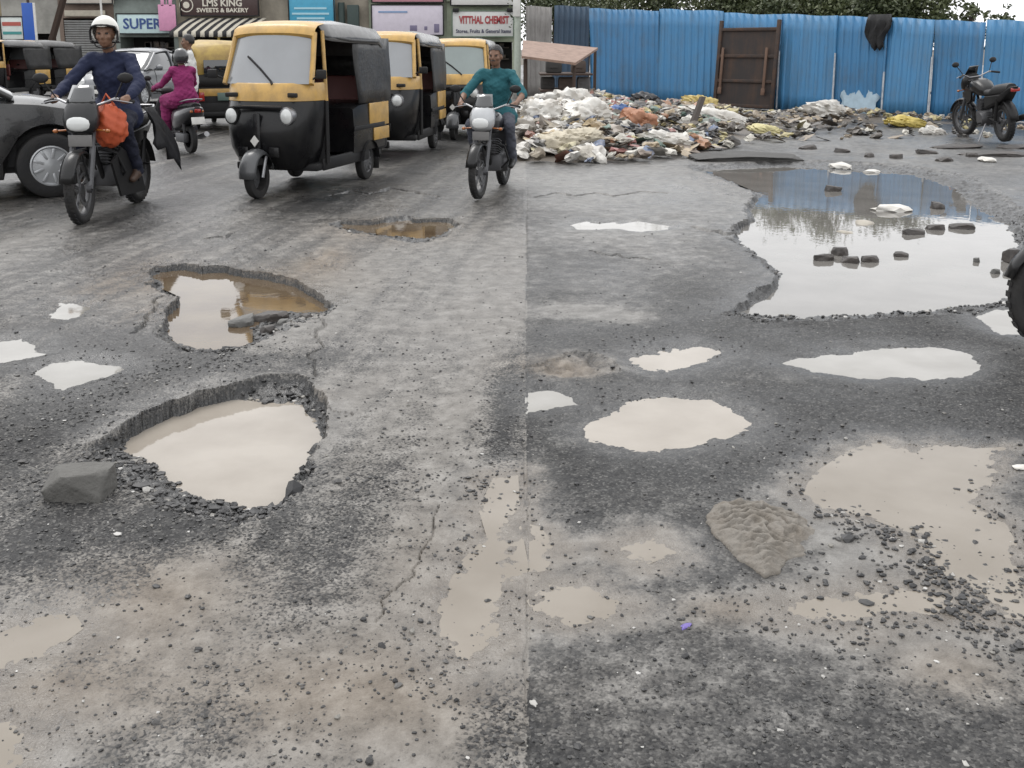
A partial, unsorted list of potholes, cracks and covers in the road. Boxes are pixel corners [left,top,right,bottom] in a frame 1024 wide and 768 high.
pothole [329,215,461,243]
pothole [76,373,329,526]
pothole [145,263,336,355]
pothole [683,160,1024,325]
pothole [524,350,621,384]
pothole [796,439,1024,620]
pothole [782,584,969,624]
crack [377,504,440,622]
